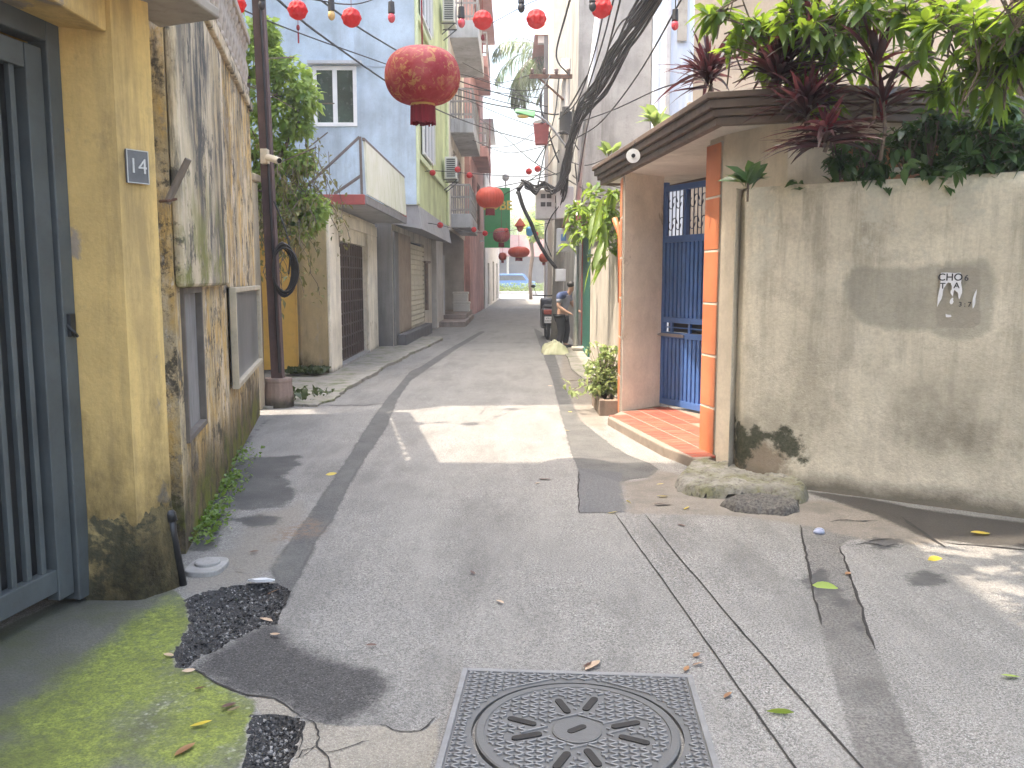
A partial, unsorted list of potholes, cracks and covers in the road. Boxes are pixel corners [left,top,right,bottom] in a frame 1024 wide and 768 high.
crack [614,512,1024,768]
manhole cover [434,668,720,768]
manhole cover [185,557,229,577]
crack [386,717,435,732]
pothole [242,714,306,768]
pothole [171,583,292,668]
